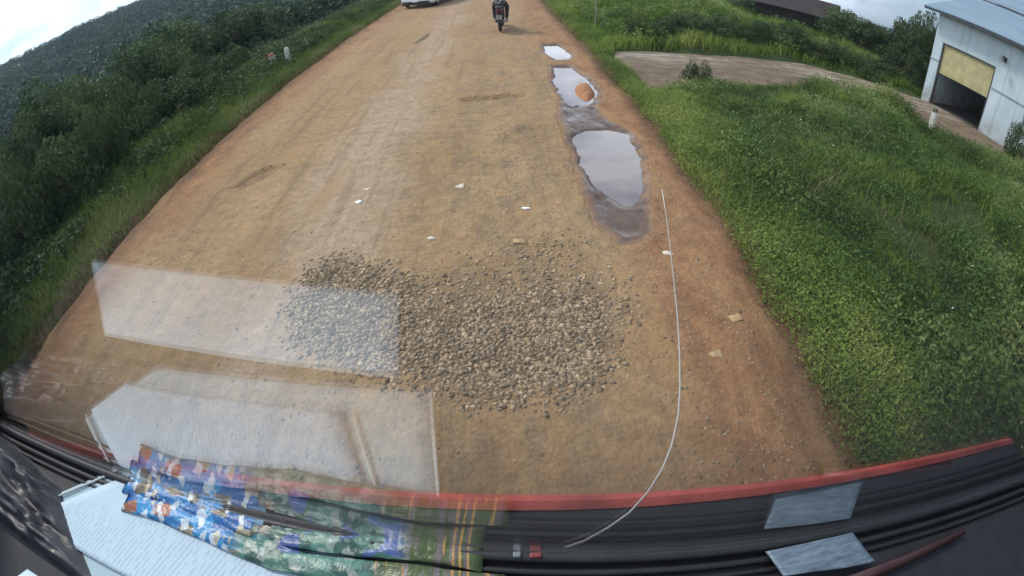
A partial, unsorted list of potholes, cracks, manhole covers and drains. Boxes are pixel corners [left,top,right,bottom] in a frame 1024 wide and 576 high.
pothole [459,94,527,103]
pothole [539,42,576,60]
pothole [548,64,656,245]
pothole [230,163,288,190]
